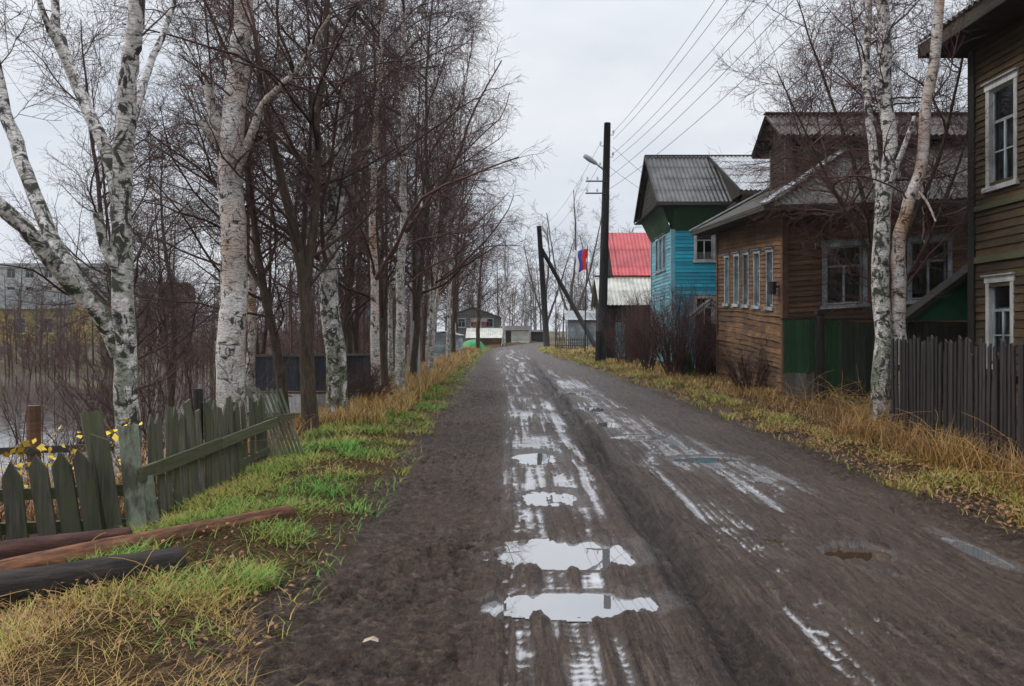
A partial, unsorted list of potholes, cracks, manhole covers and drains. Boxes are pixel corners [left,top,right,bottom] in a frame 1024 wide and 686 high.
pothole [923,525,1024,576]
pothole [477,532,641,574]
pothole [475,582,668,623]
pothole [815,538,906,562]
pothole [515,485,592,510]
pothole [502,447,566,466]
